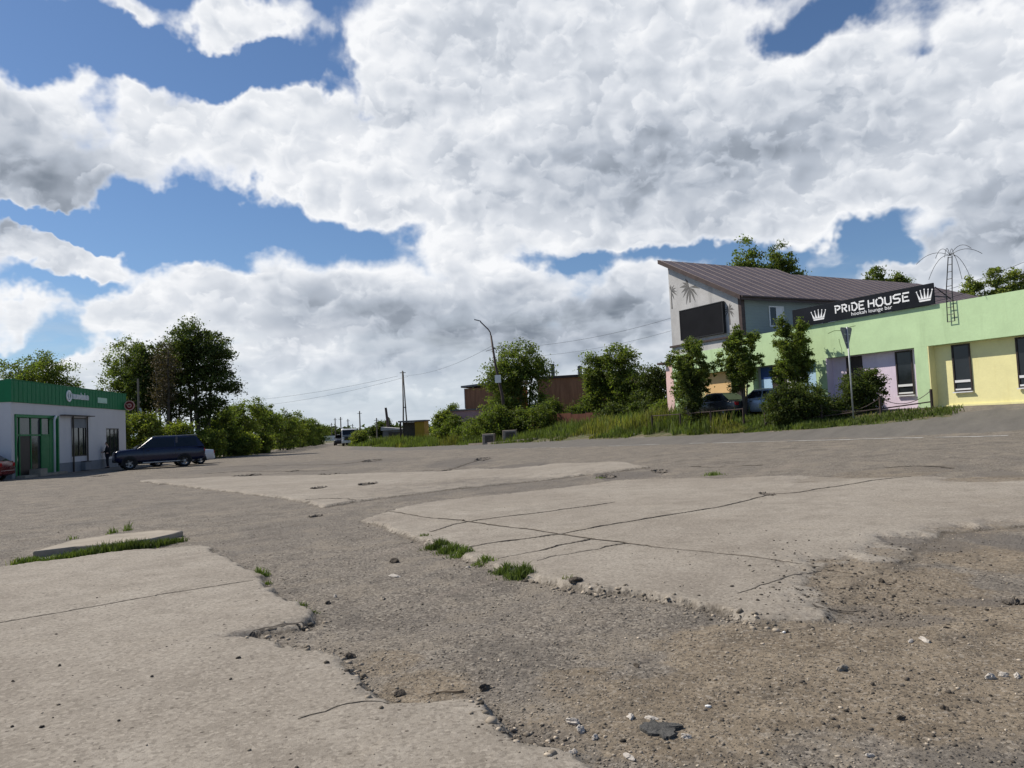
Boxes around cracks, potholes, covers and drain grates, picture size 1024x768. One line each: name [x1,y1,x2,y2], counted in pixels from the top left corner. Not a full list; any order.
crack [739,570,822,593]
crack [502,539,628,561]
crack [298,701,389,719]
